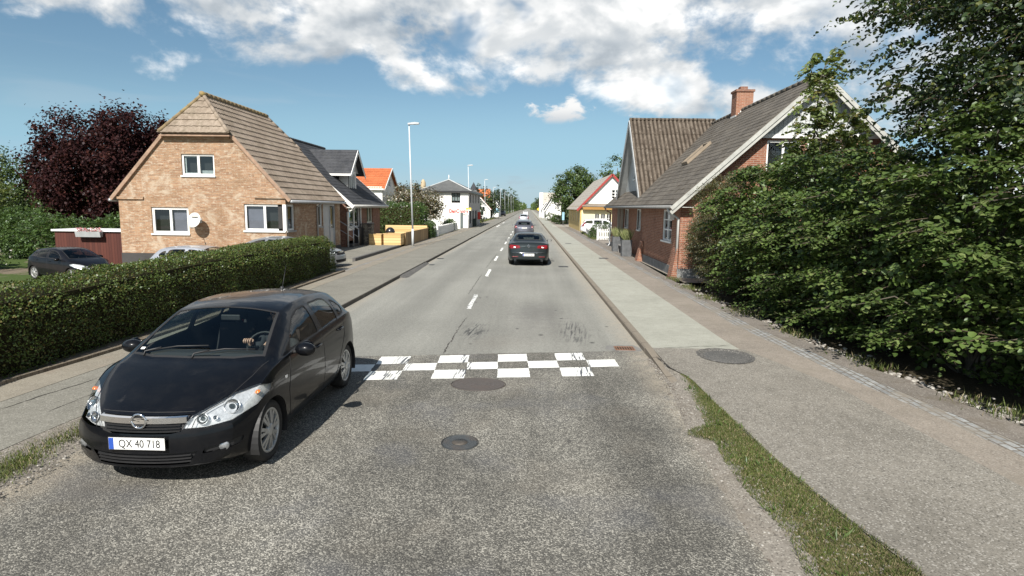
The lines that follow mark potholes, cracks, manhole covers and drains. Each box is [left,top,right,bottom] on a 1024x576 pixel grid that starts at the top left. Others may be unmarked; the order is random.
manhole cover [451,378,506,391]
manhole cover [696,348,755,364]
manhole cover [441,434,479,451]
